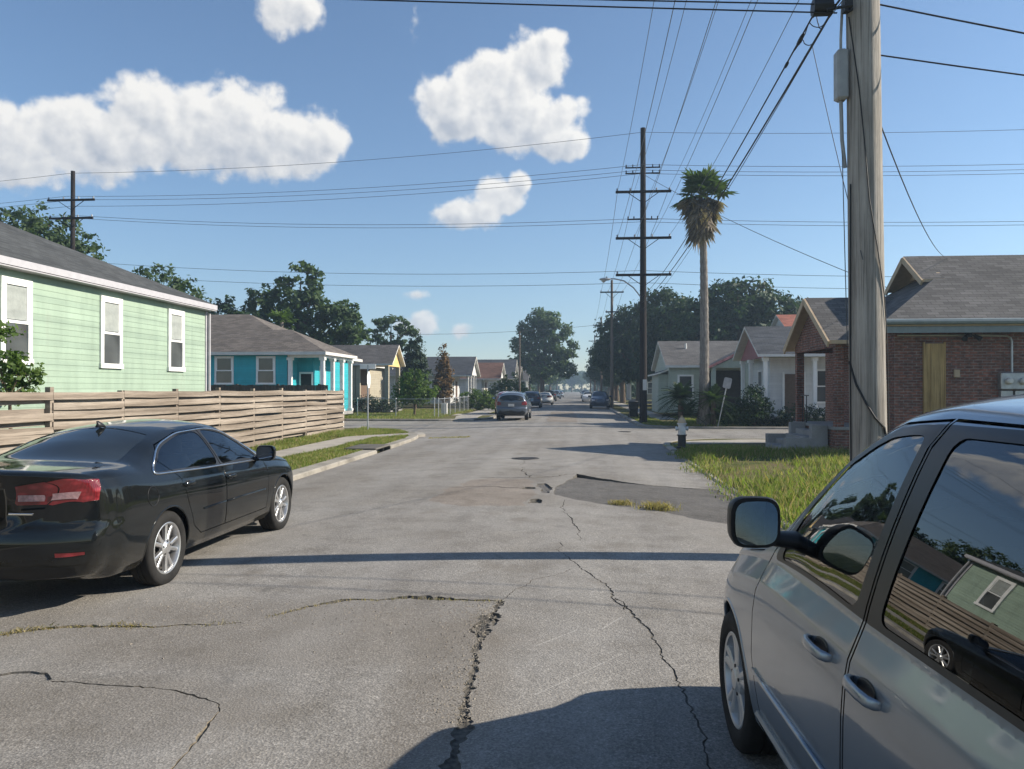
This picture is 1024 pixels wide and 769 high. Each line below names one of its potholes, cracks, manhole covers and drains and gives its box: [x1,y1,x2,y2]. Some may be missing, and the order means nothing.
crack [52,681,220,769]
crack [8,622,245,634]
pothole [537,483,553,493]
crack [484,461,566,488]
crack [273,500,711,769]
drain grate [344,444,391,453]
